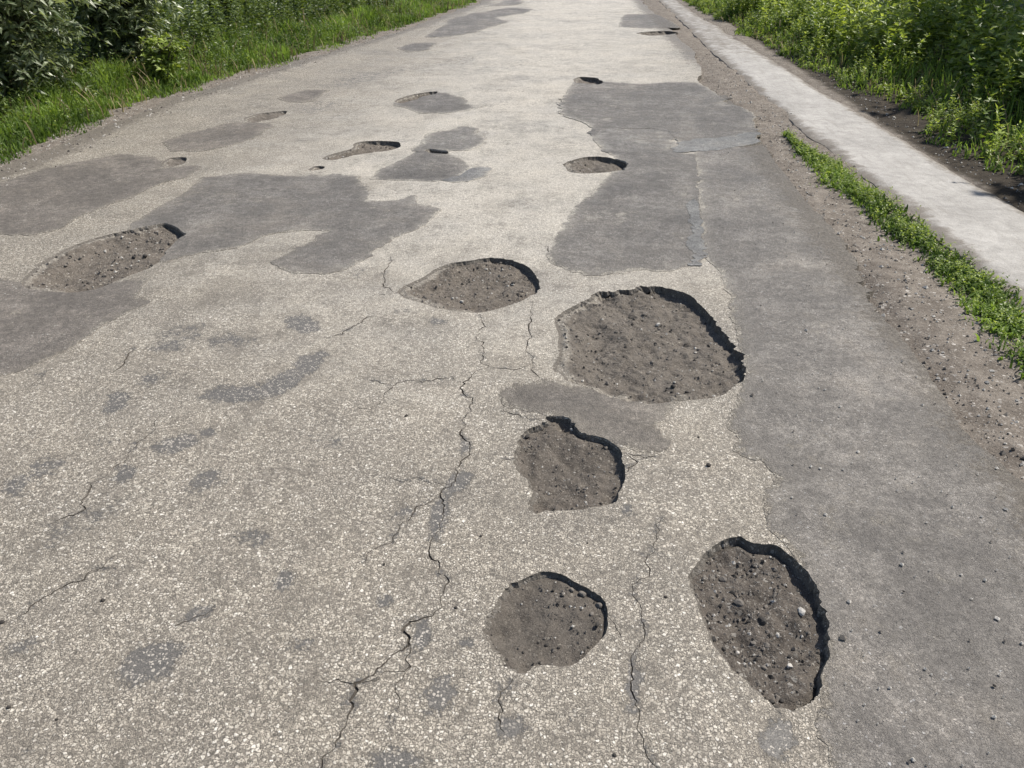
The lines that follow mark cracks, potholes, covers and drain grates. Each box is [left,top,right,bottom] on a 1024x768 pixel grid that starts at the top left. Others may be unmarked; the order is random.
crack [608,518,662,768]
crack [317,316,530,768]
pothole [688,536,829,711]
pothole [397,258,541,313]
